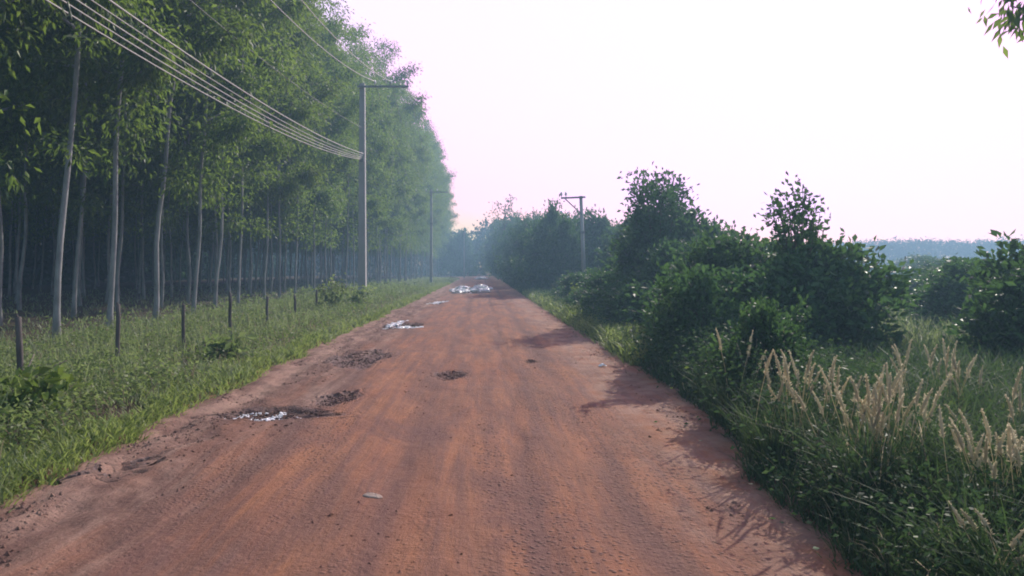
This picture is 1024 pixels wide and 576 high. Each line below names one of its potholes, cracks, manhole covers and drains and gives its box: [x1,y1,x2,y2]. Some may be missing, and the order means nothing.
pothole [430,370,471,381]
pothole [378,321,429,330]
pothole [313,348,400,373]
pothole [310,388,368,409]
pothole [446,287,500,295]
pothole [191,404,362,423]
